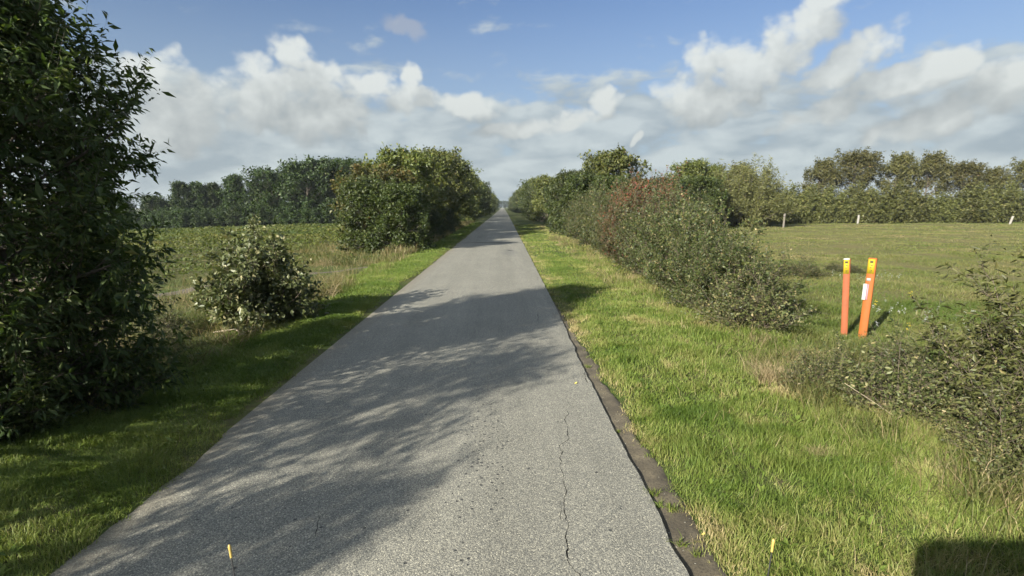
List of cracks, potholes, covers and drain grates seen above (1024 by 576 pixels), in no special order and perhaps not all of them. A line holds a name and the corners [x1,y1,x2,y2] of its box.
crack [559,411,581,576]
